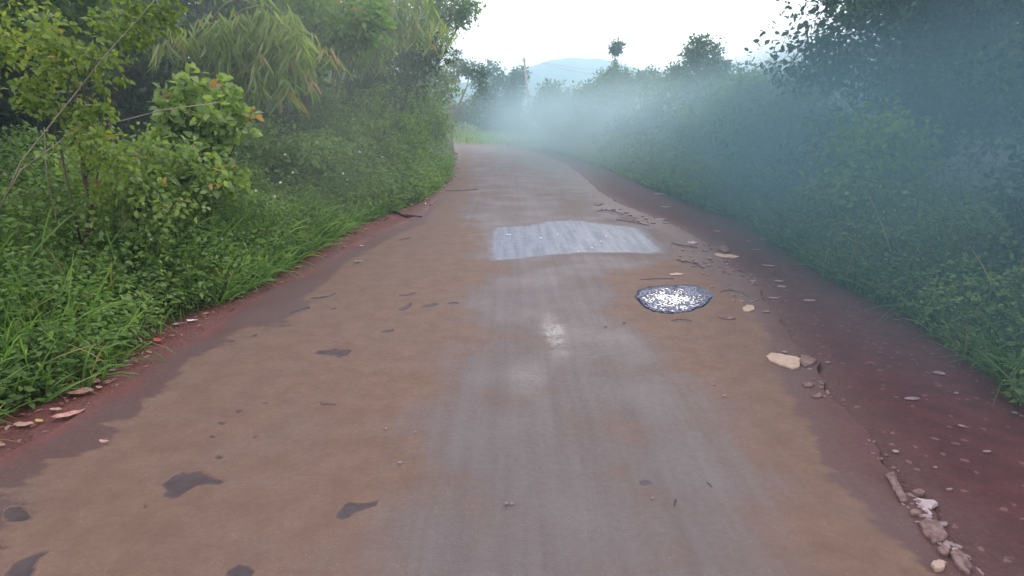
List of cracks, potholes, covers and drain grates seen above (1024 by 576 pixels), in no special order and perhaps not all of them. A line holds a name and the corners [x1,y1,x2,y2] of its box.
pothole [634,284,715,314]
